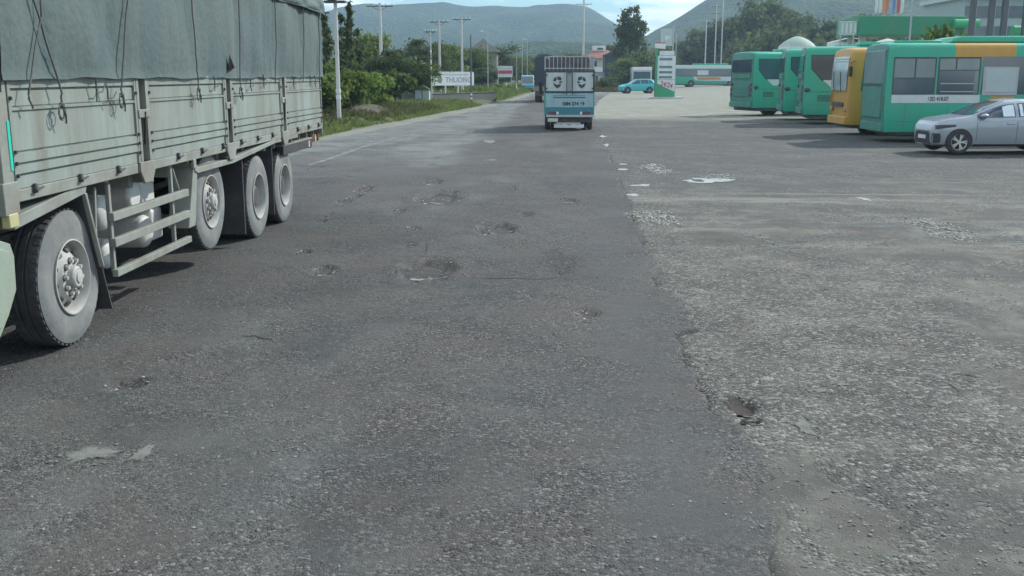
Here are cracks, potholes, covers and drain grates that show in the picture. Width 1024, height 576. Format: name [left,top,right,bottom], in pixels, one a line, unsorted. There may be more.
pothole [104,376,150,391]
pothole [395,257,452,281]
pothole [726,395,757,418]
pothole [475,223,514,235]
pothole [412,191,466,204]
